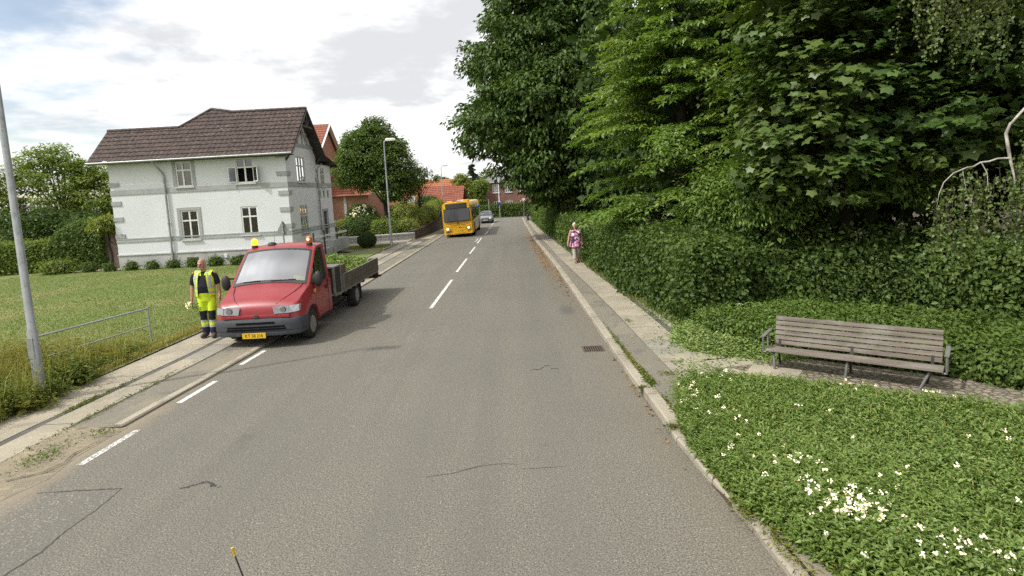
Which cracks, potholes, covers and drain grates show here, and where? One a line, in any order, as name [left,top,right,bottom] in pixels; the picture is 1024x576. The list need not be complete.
crack [180,481,221,489]
crack [426,463,548,477]
